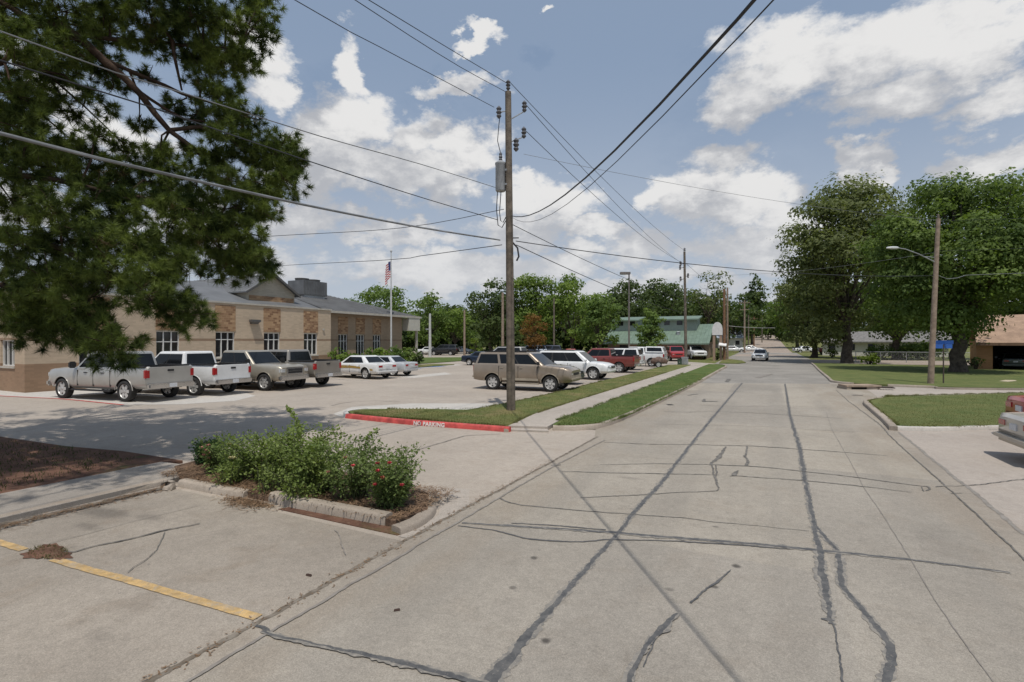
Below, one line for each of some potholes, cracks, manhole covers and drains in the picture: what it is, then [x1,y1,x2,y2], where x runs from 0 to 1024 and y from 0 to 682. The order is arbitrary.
crack [500,394,993,681]
crack [65,523,199,572]
